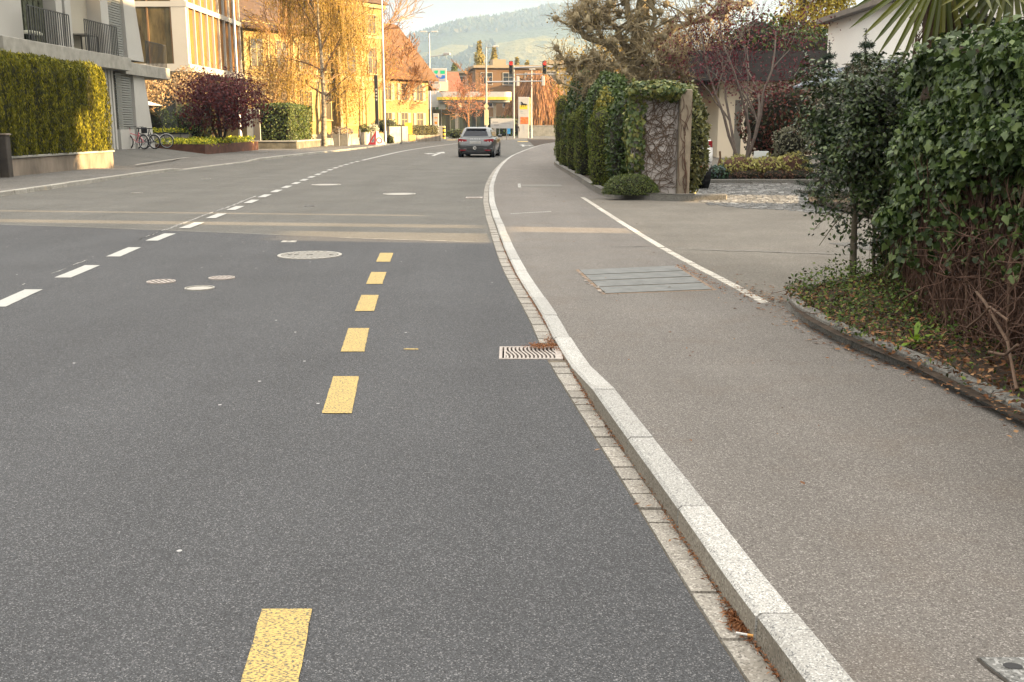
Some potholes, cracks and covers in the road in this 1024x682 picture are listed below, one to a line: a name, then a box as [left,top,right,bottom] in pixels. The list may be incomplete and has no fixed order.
utility cover [977,657,1024,682]
drain grate [499,346,563,360]
manhole cover [277,251,342,260]
